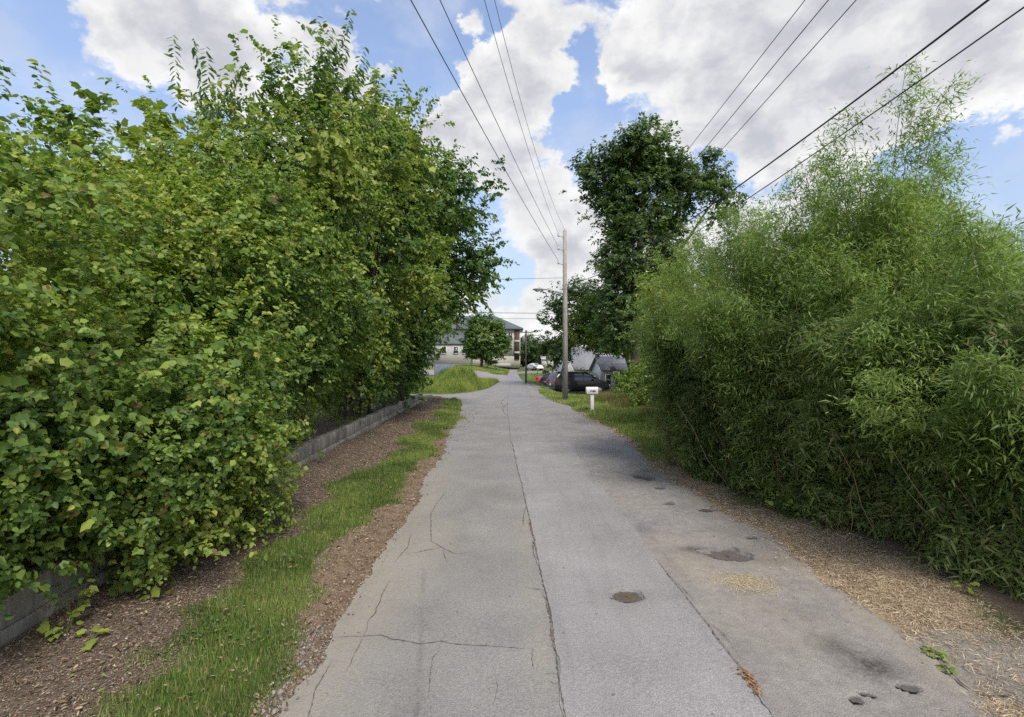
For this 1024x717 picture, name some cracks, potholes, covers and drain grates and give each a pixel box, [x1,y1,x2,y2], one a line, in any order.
pothole [893,683,923,692]
pothole [696,546,755,562]
crack [342,582,515,697]
pothole [630,473,656,481]
pothole [609,588,646,603]
crack [397,494,461,561]
